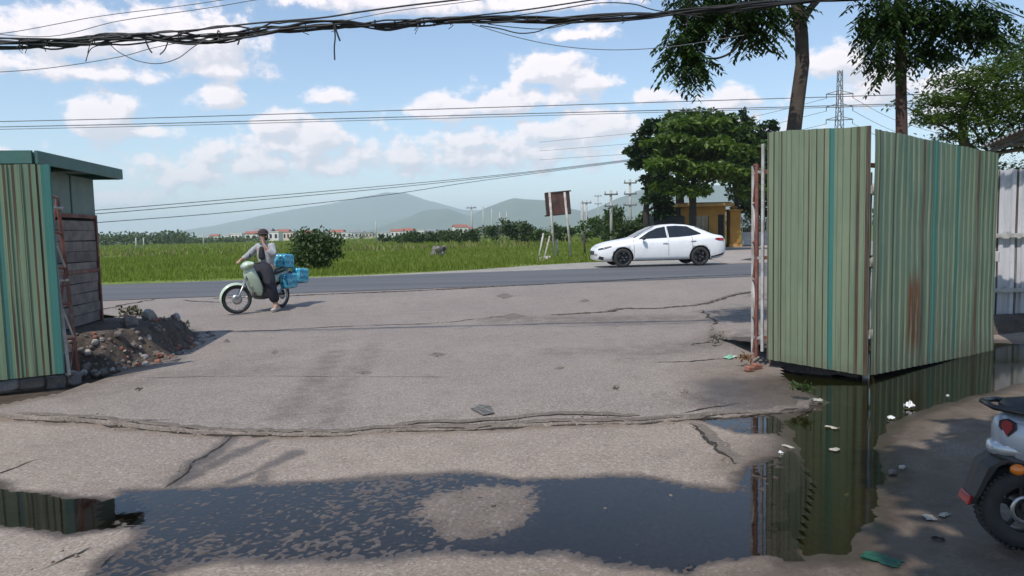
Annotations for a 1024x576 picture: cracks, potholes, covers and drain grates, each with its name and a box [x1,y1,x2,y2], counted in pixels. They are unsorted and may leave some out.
crack [551,291,756,362]
crack [14,400,816,488]
crack [30,547,90,570]
